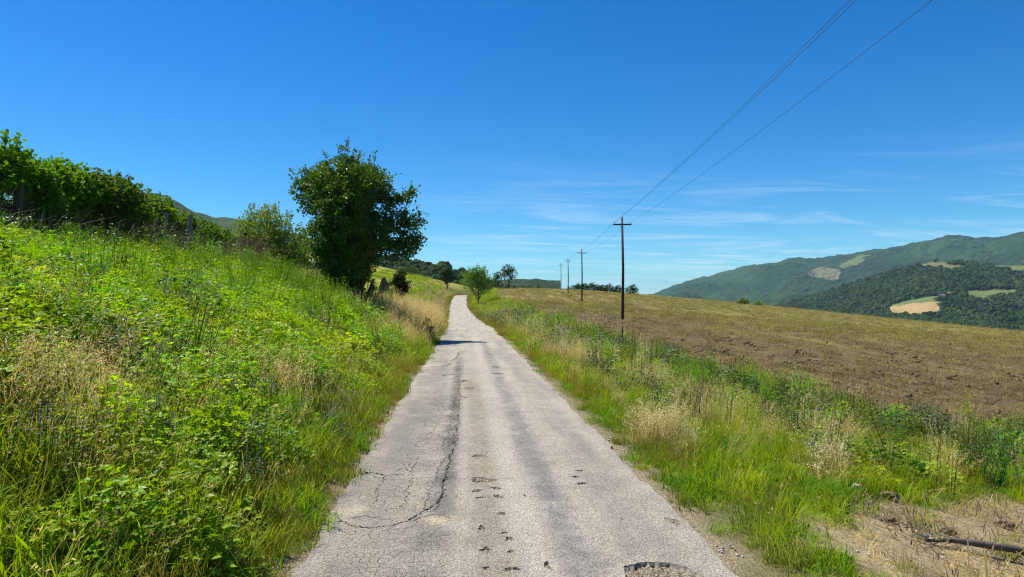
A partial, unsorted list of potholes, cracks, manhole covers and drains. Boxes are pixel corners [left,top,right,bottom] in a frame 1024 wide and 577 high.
pothole [624,561,701,577]
crack [322,352,461,577]
